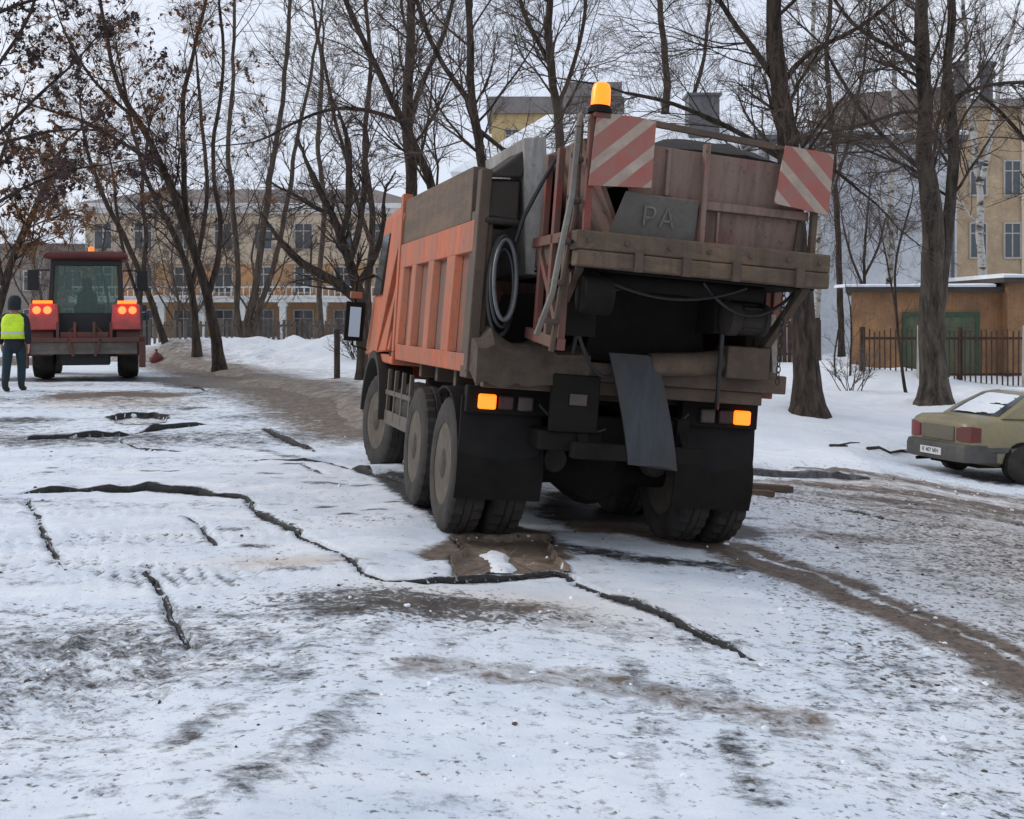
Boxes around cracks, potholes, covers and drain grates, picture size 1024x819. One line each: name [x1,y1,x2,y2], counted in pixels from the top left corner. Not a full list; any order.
crack [24,422,207,452]
crack [19,428,756,661]
